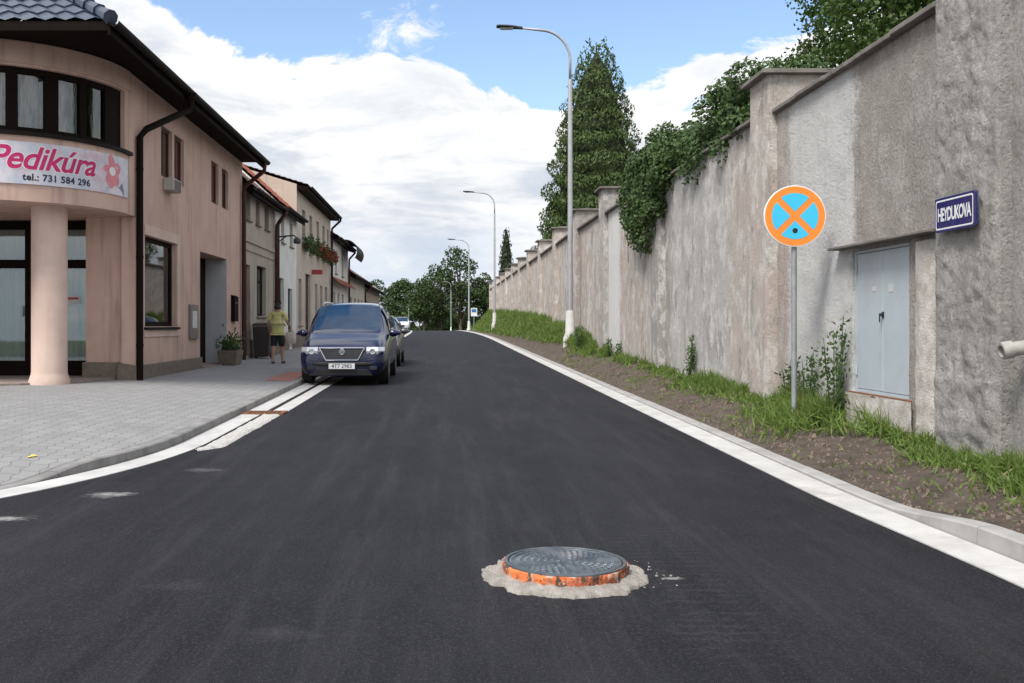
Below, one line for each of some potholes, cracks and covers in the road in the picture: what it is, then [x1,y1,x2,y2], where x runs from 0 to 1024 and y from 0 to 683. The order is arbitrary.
manhole cover [481,547,649,600]
